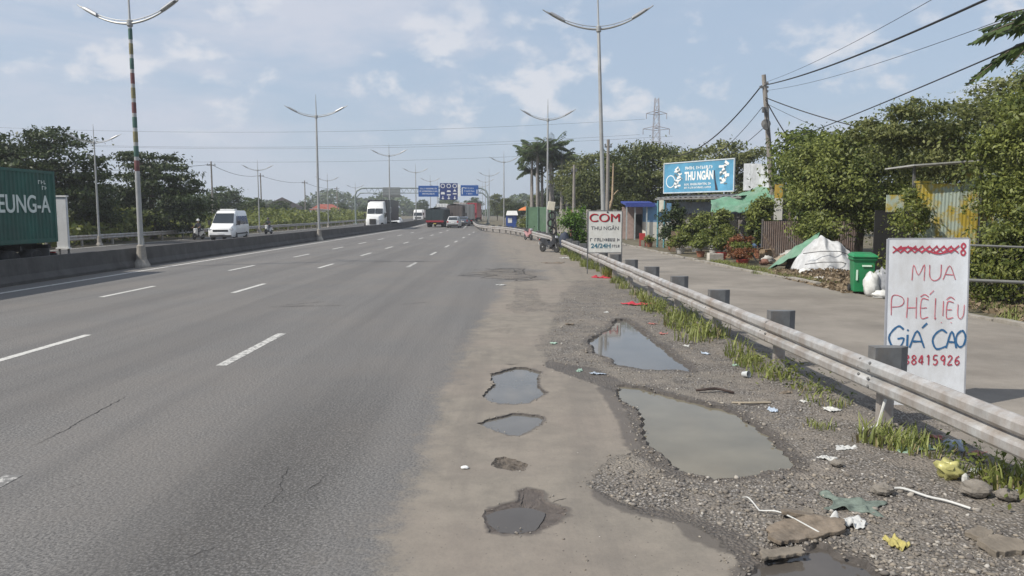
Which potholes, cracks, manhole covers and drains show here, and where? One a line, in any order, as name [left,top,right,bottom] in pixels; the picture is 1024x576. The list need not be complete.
pothole [482,367,546,404]
pothole [482,488,568,534]
pothole [477,413,544,436]
pothole [587,318,691,372]
pothole [745,541,881,576]
pothole [615,384,797,480]
pothole [491,456,528,471]
